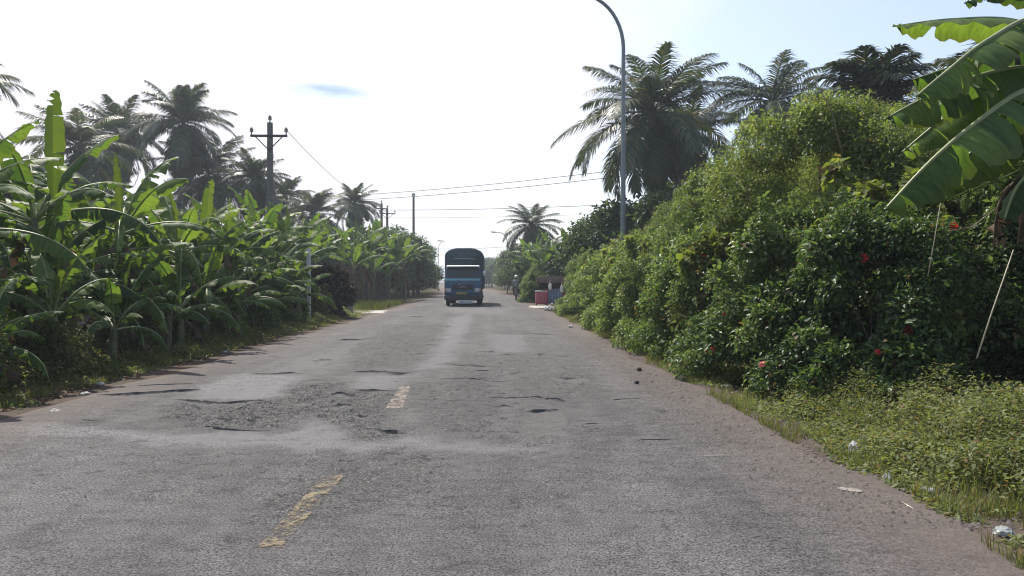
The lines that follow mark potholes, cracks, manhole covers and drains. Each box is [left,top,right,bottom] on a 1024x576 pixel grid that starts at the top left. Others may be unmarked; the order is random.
pothole [371,428,407,436]
pothole [98,389,200,397]
pothole [328,392,374,400]
pothole [171,399,265,408]
